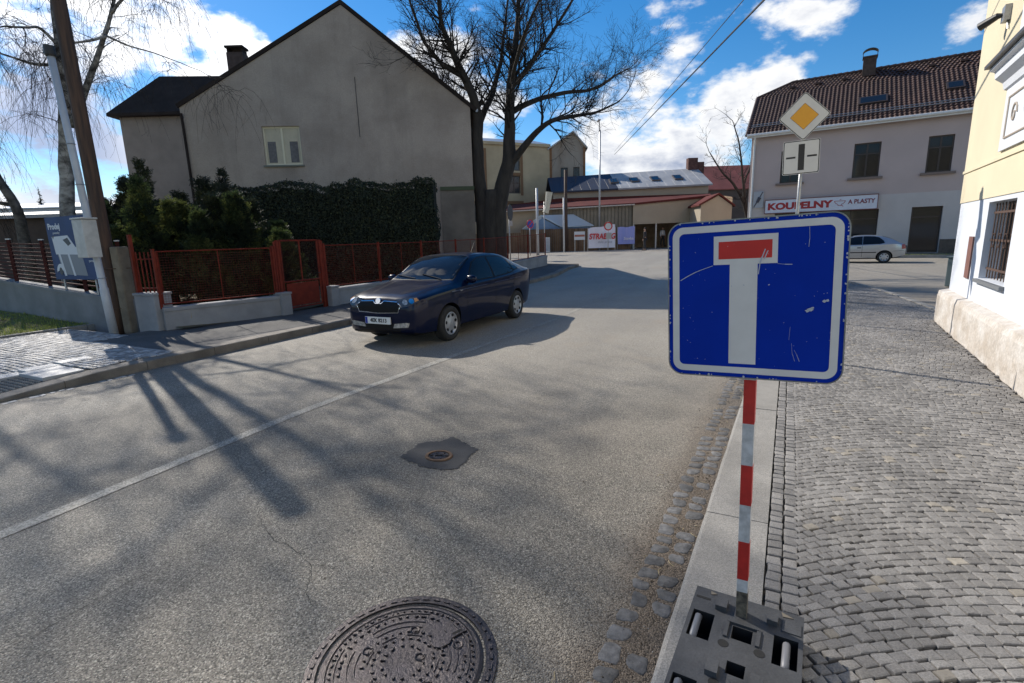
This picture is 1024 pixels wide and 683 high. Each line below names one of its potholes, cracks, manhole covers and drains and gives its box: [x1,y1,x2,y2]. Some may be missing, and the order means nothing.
manhole cover [302,596,498,683]
utility cover [425,450,453,462]
crack [257,506,338,606]
